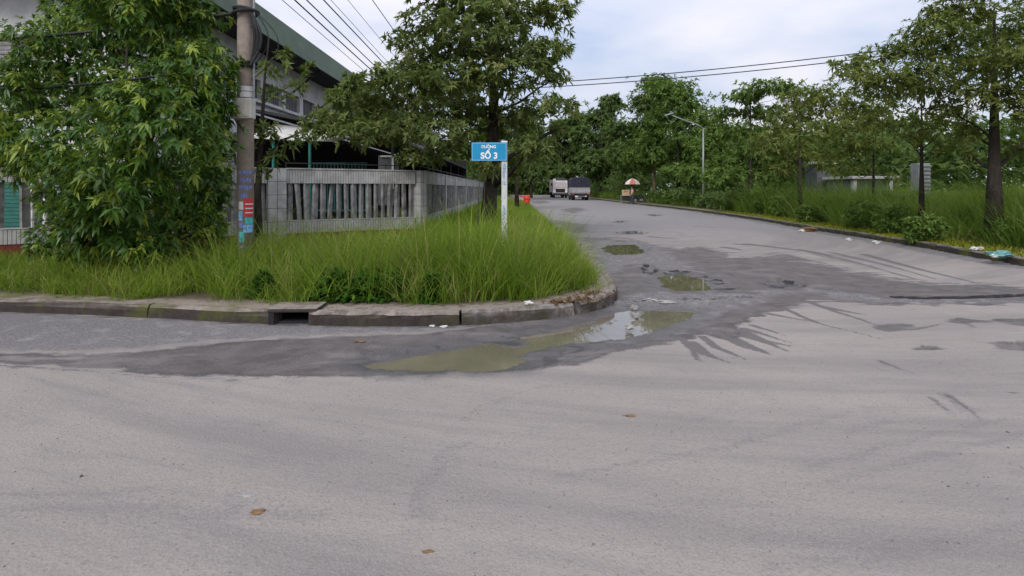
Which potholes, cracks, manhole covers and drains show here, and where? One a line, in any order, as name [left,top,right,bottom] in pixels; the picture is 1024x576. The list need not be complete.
pothole [348,303,729,373]
pothole [639,269,741,291]
pothole [631,262,661,276]
drain grate [268,302,327,325]
pothole [596,240,654,256]
